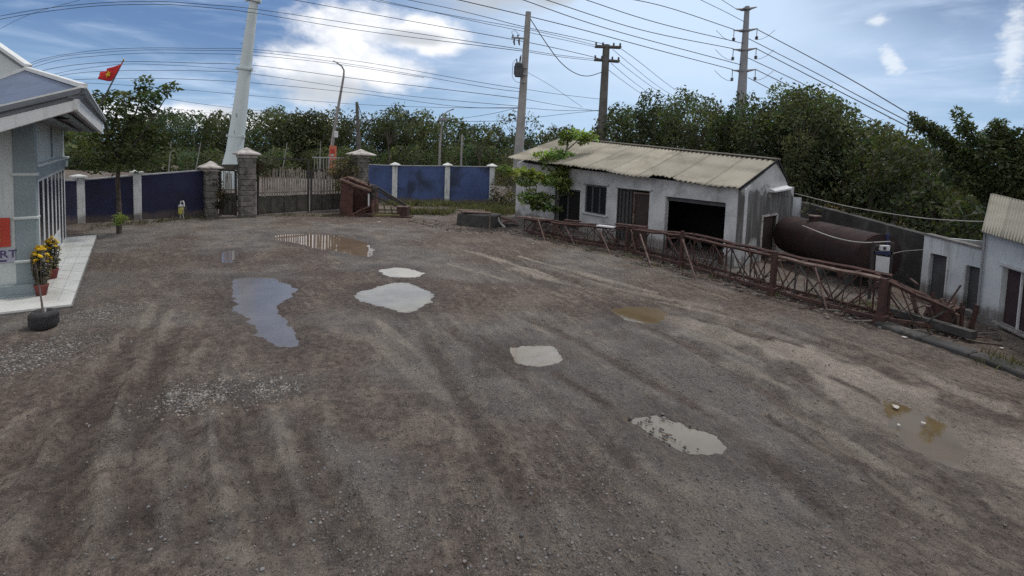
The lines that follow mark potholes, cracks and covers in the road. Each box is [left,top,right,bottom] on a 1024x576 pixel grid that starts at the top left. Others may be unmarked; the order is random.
pothole [261,232,387,259]
pothole [209,273,327,356]
pothole [333,278,452,318]
pothole [362,263,439,281]
pothole [196,248,253,268]
pothole [599,399,764,477]
pothole [593,300,688,330]
pothole [485,336,587,377]
